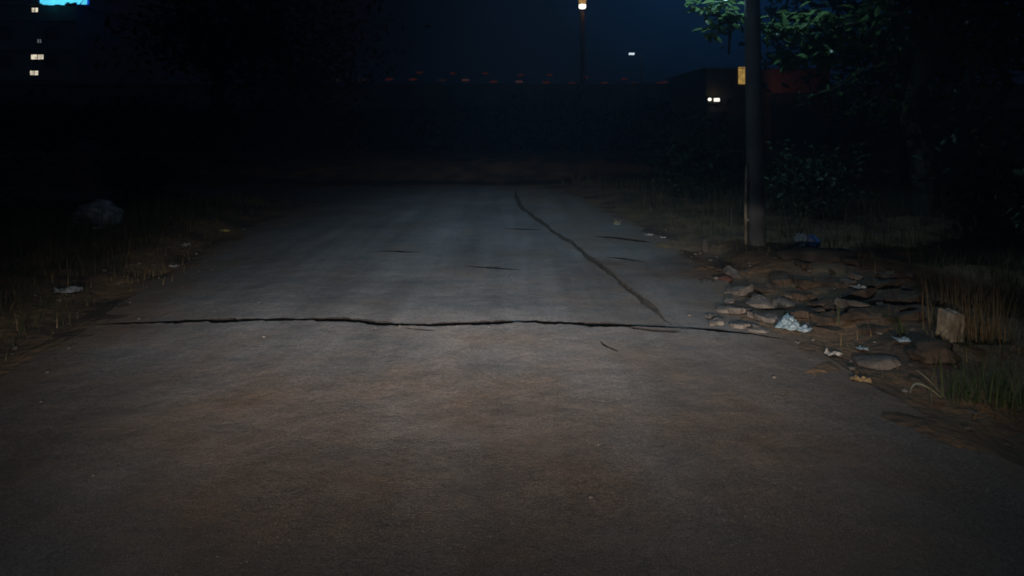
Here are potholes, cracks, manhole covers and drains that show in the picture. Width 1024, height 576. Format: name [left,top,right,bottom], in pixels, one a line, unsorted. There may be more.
crack [95,191,788,352]
